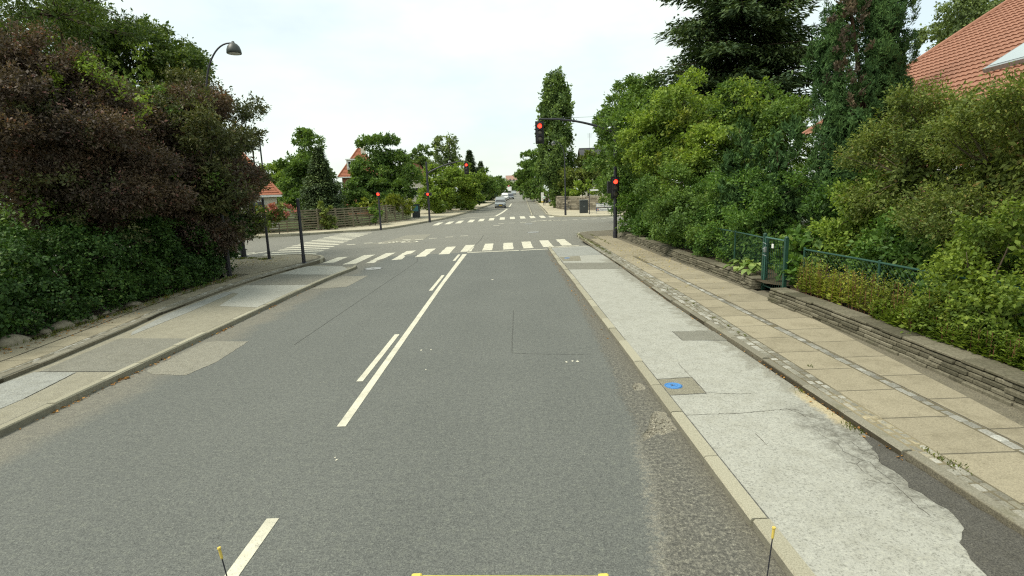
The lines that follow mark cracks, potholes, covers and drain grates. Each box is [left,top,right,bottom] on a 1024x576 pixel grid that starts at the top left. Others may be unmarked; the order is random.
crack [820,434,928,514]
